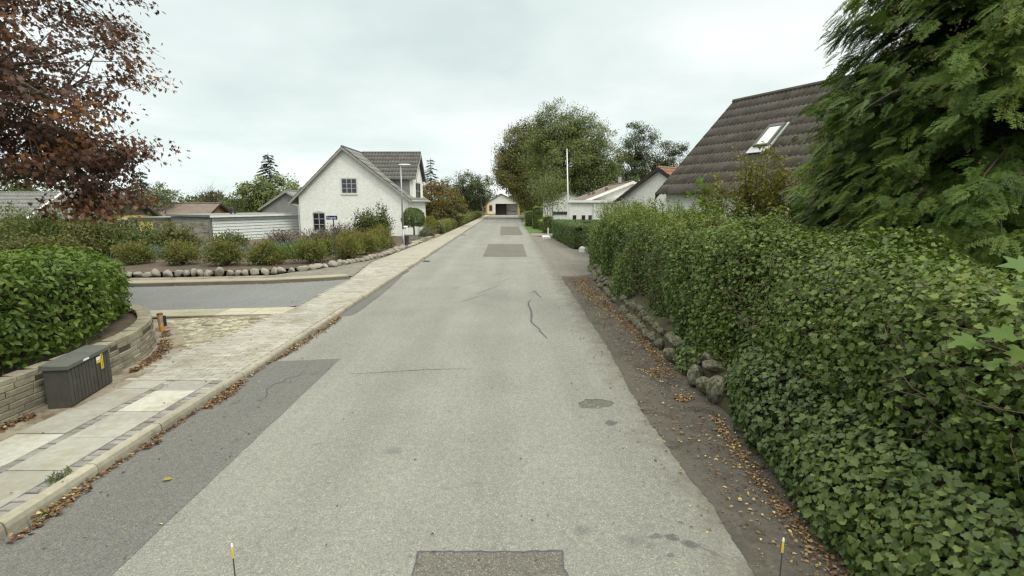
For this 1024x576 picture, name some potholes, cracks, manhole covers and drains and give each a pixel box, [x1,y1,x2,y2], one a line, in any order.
crack [528,290,546,338]
